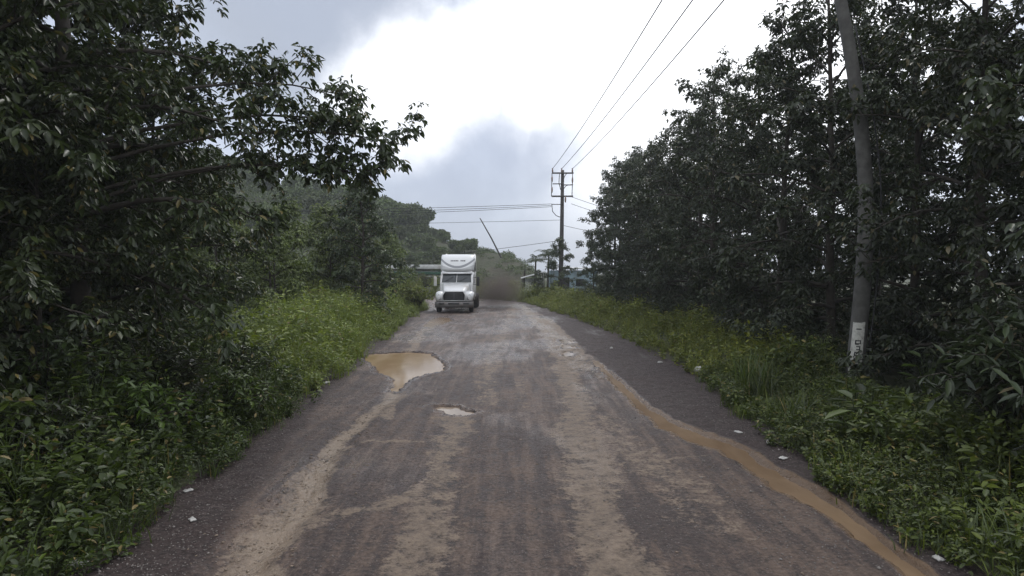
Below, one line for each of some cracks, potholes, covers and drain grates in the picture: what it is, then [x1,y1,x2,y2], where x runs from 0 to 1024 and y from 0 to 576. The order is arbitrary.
pothole [413,401,495,419]
pothole [356,350,458,395]
pothole [552,348,585,359]
